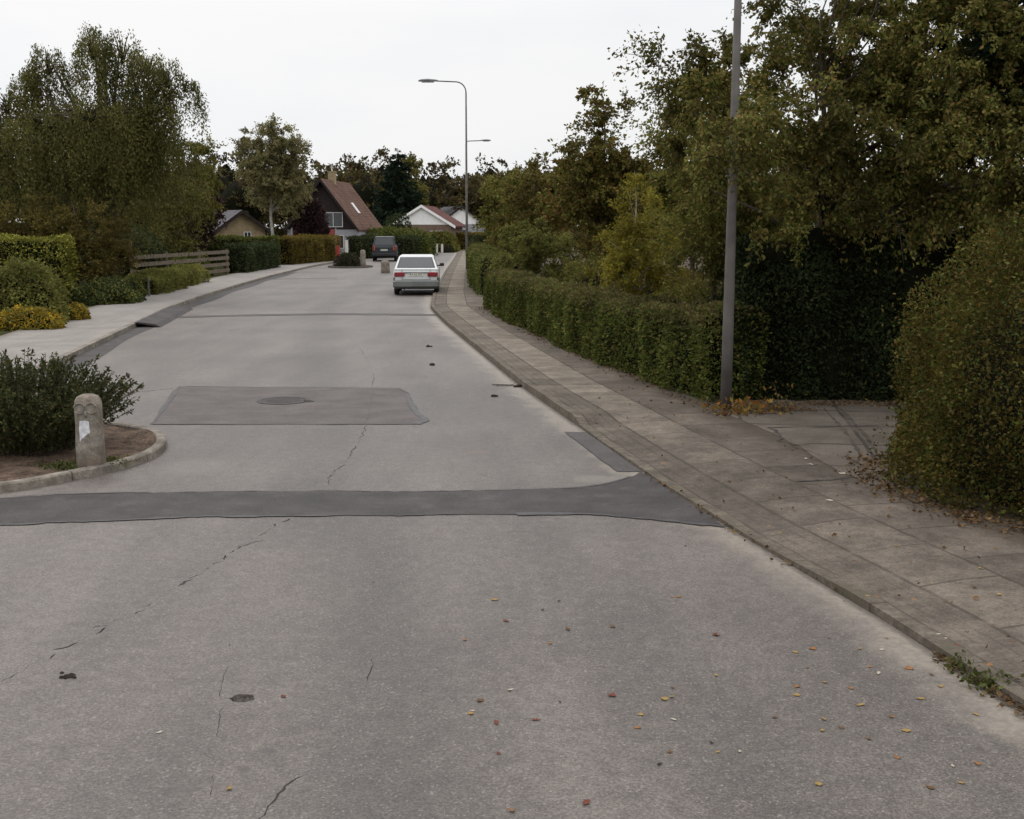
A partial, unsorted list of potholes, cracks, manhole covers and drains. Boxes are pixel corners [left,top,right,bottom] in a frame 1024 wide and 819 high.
crack [258,776,302,819]
pothole [229,694,254,702]
manhole cover [257,396,310,405]
crack [3,519,290,681]
